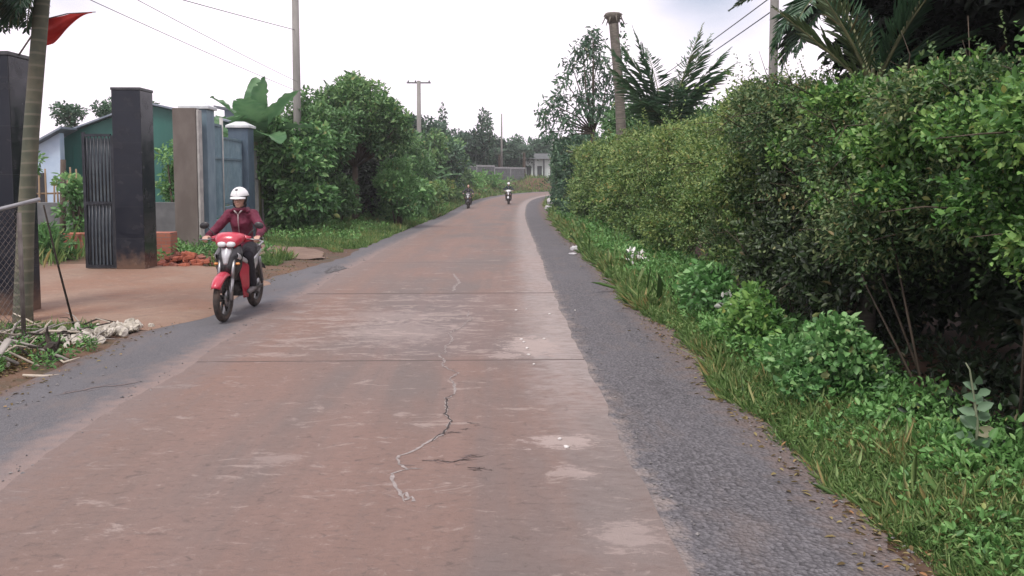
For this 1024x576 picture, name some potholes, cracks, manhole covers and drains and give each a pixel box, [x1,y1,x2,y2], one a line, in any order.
crack [58,381,139,395]
crack [390,310,491,502]
